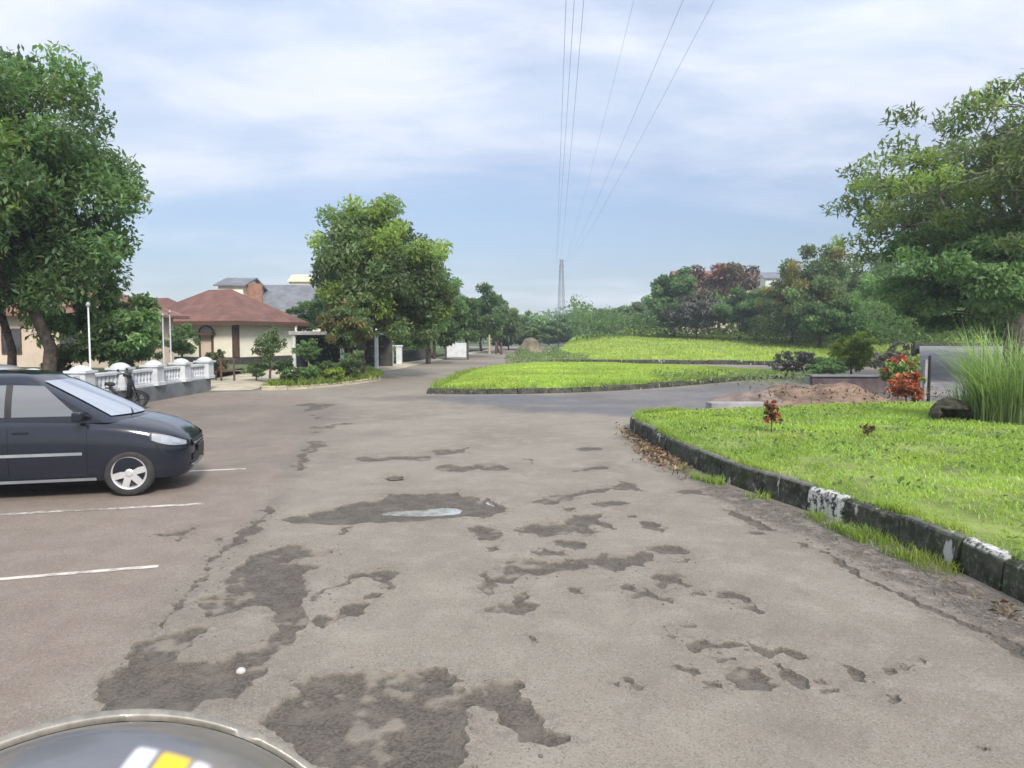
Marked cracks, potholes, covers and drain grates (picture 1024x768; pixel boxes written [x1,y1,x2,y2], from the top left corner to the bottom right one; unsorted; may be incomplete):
pothole [258,666,571,768]
pothole [530,548,568,556]
pothole [724,665,780,692]
pothole [476,550,654,595]
pothole [311,602,370,628]
pothole [619,583,675,605]
pothole [435,464,510,472]
pothole [671,664,701,676]
pothole [94,544,339,712]
pothole [746,640,807,660]
pothole [281,491,507,525]
pothole [772,662,810,690]
